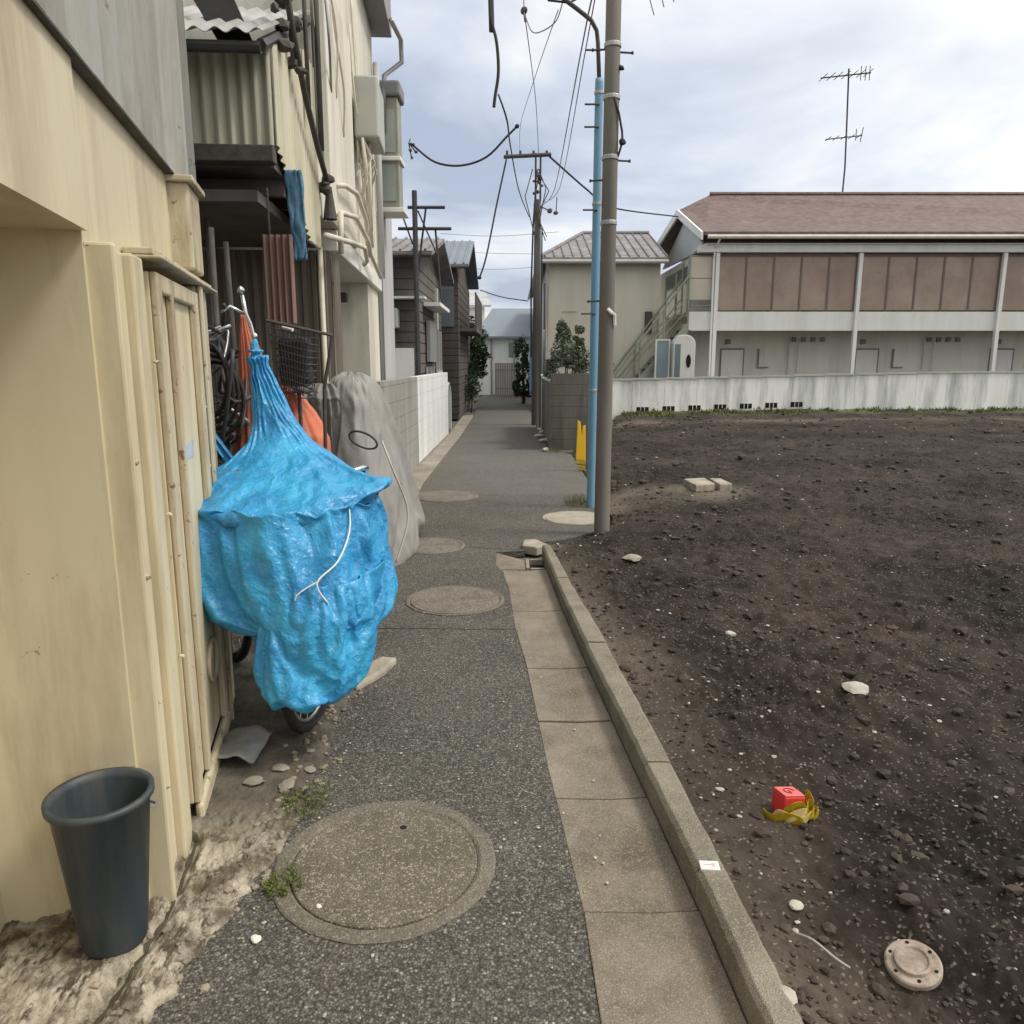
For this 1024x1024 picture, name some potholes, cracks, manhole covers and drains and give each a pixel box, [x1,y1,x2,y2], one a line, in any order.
drain grate [526,559,545,571]
manhole cover [542,511,594,525]
manhole cover [406,585,504,616]
manhole cover [415,538,465,554]
manhole cover [418,490,479,502]
manhole cover [270,800,496,945]
